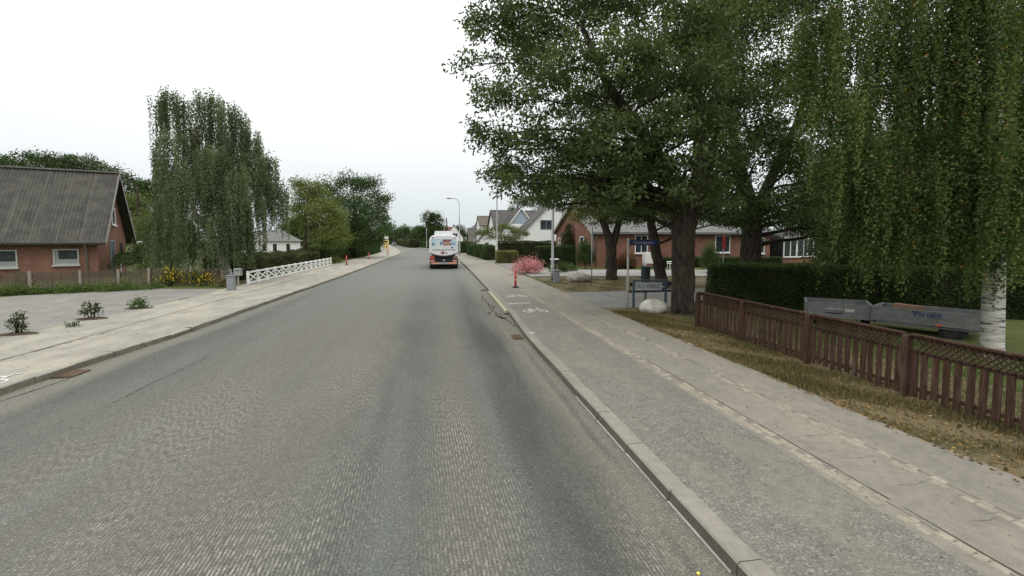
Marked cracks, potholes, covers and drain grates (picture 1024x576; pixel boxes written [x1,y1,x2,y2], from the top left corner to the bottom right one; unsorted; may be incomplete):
drain grate [50,369,91,379]
